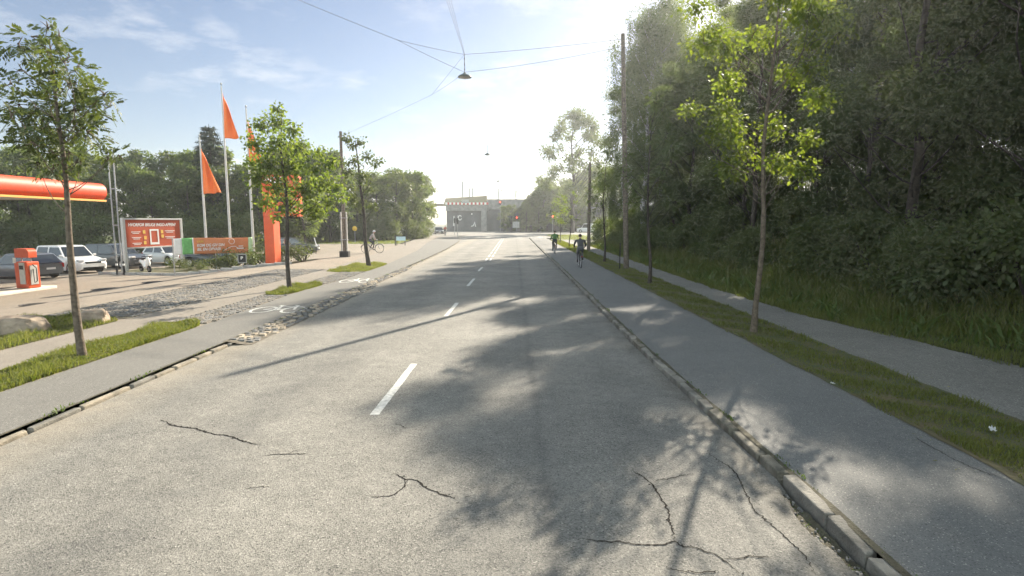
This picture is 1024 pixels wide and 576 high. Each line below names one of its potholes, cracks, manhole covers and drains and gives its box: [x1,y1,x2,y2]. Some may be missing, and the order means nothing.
crack [380,472,467,498]
crack [160,420,306,455]
crack [578,453,815,574]
